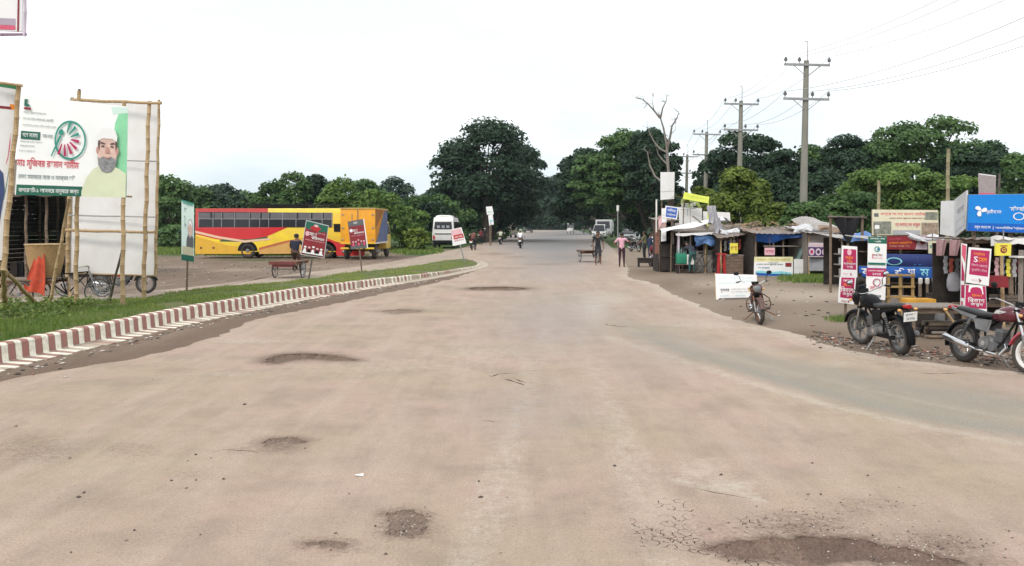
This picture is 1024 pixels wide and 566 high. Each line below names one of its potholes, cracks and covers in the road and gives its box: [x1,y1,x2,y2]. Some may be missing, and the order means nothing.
pothole [385,510,428,537]
crack [631,489,783,566]
pothole [707,536,963,566]
pothole [304,540,349,549]
pothole [265,354,353,363]
pothole [262,437,307,446]
